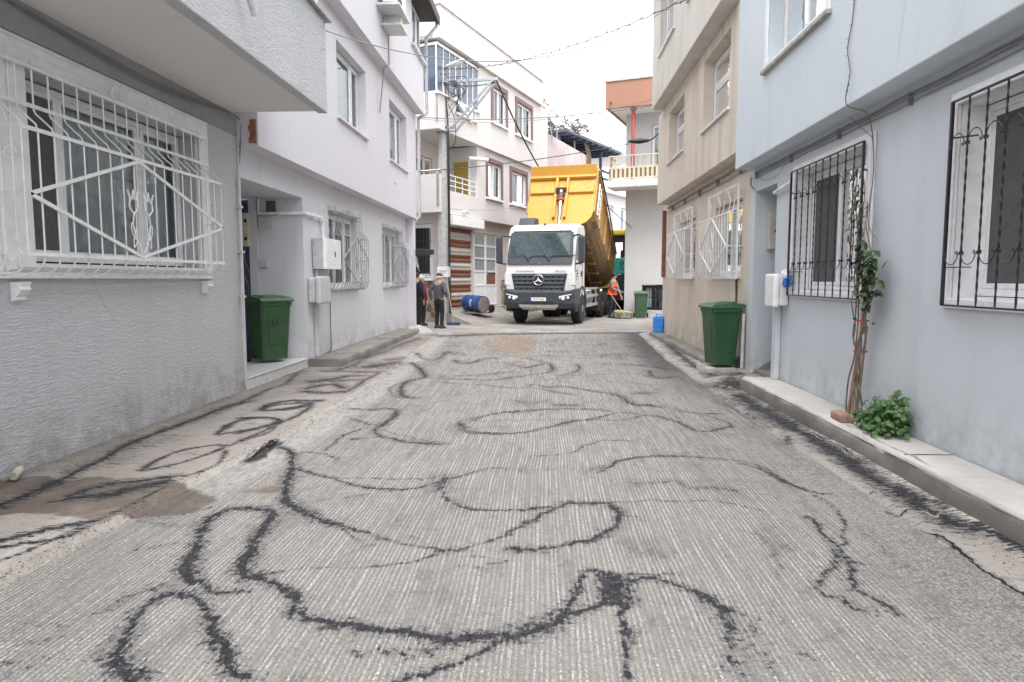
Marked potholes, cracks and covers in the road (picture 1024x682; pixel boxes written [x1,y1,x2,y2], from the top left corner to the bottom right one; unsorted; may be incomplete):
crack [884,508,1024,598]
crack [812,424,929,465]
